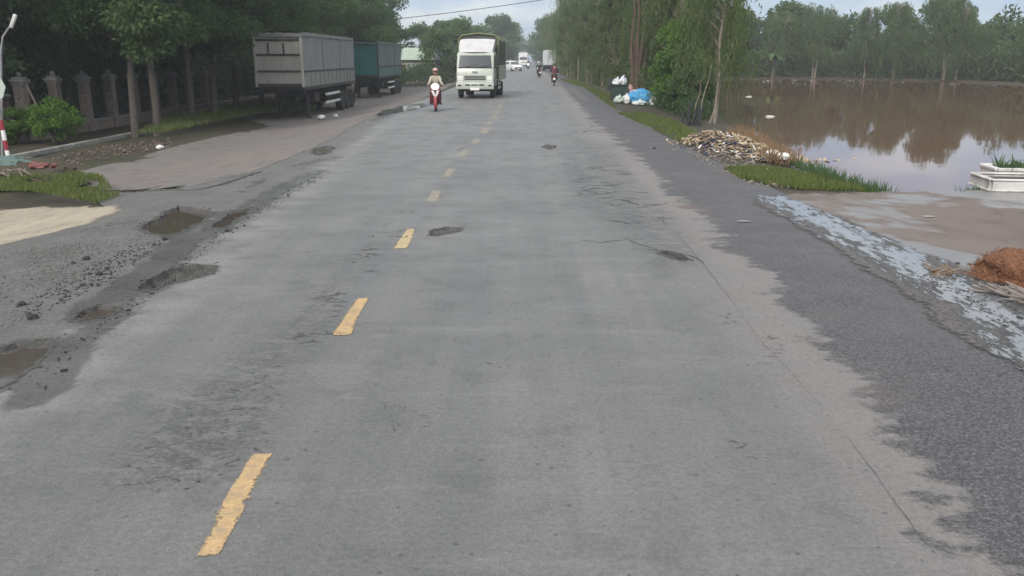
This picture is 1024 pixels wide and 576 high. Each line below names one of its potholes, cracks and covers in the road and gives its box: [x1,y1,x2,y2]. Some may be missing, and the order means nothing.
pothole [132,206,217,236]
crack [558,154,938,557]
pothole [71,303,124,321]
pothole [134,262,221,293]
pothole [209,207,254,228]
pothole [657,250,693,262]
pothole [311,146,335,156]
pothole [426,226,465,237]
pothole [0,333,66,389]
